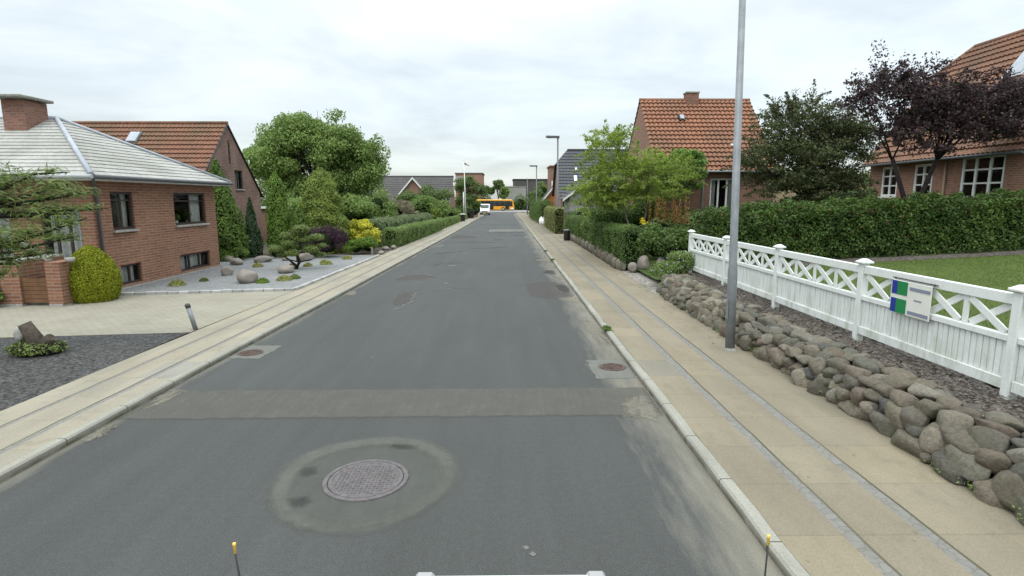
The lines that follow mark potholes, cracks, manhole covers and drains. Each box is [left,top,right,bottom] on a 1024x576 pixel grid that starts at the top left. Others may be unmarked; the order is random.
manhole cover [322,459,409,502]
crack [391,224,517,312]
